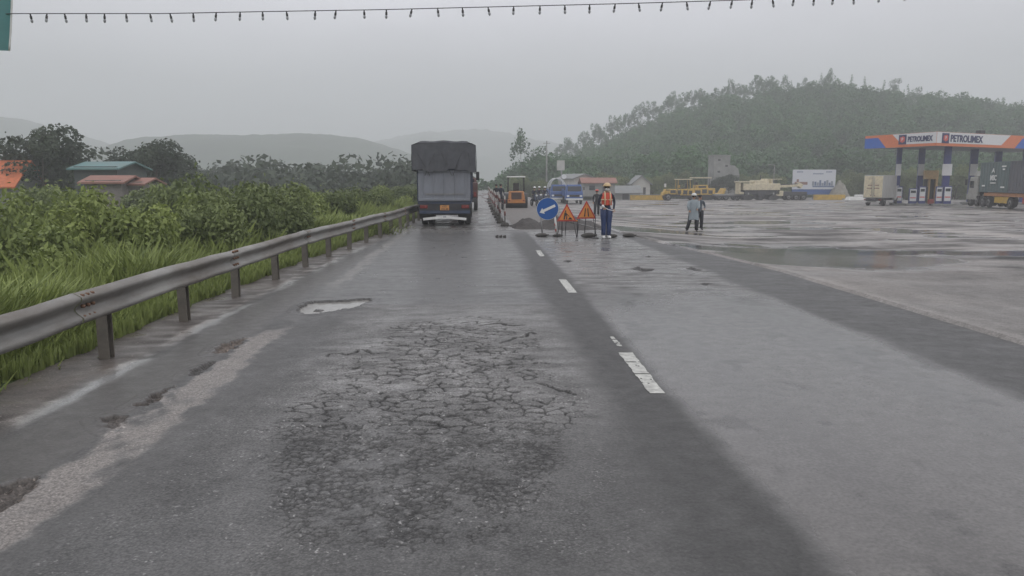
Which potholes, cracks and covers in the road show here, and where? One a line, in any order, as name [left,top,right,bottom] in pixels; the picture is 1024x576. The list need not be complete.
pothole [170,359,229,382]
pothole [286,297,381,316]
pothole [114,383,189,414]
pothole [79,411,150,438]
crack [150,310,628,576]
pothole [197,337,258,357]
